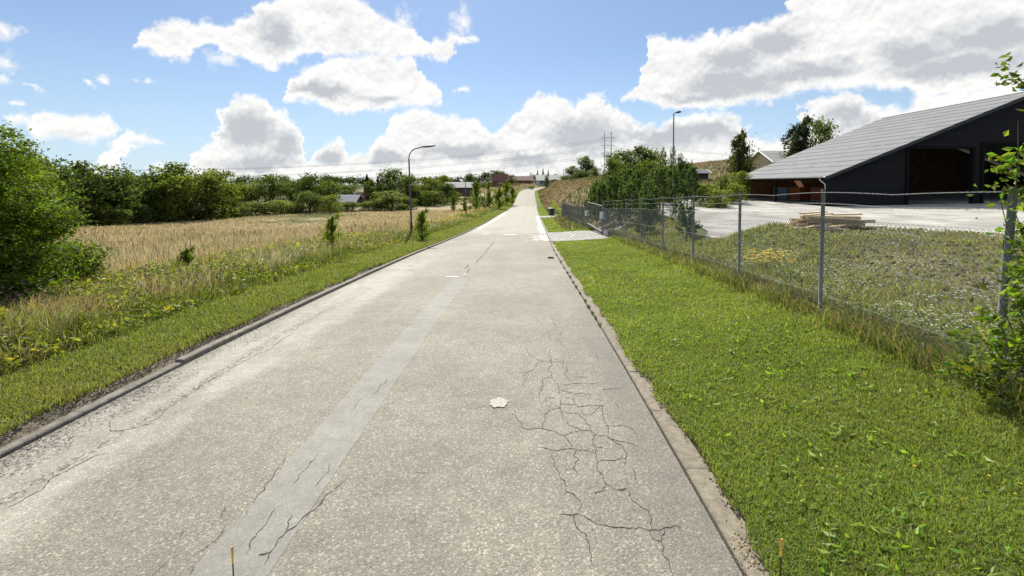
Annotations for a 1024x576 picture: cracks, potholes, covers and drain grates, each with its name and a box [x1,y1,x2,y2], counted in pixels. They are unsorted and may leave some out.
crack [189,454,347,575]
crack [512,329,680,575]
crack [109,314,319,431]
